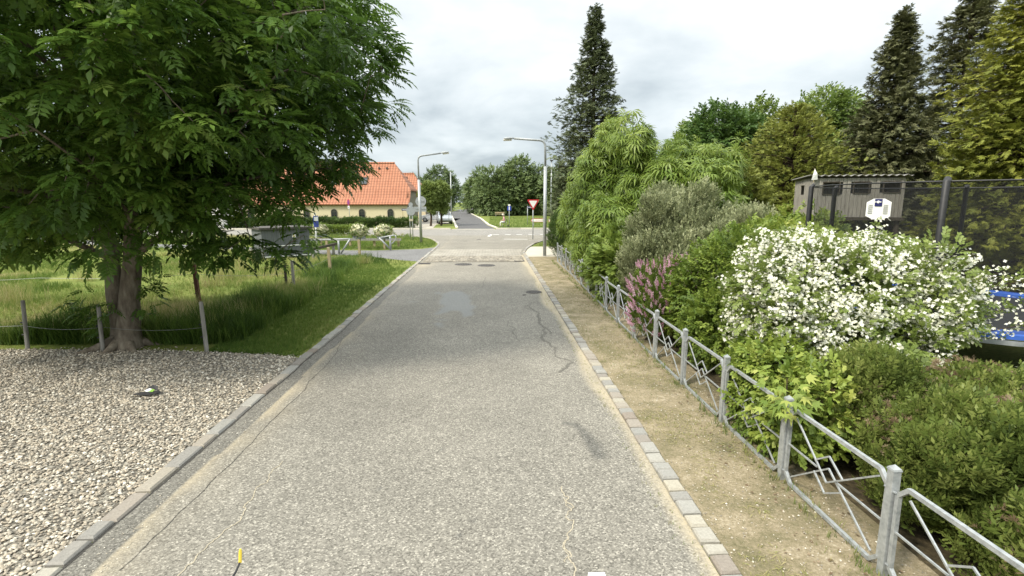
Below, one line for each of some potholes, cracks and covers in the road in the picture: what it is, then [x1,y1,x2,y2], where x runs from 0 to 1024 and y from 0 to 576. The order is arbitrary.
crack [561,486,577,576]
